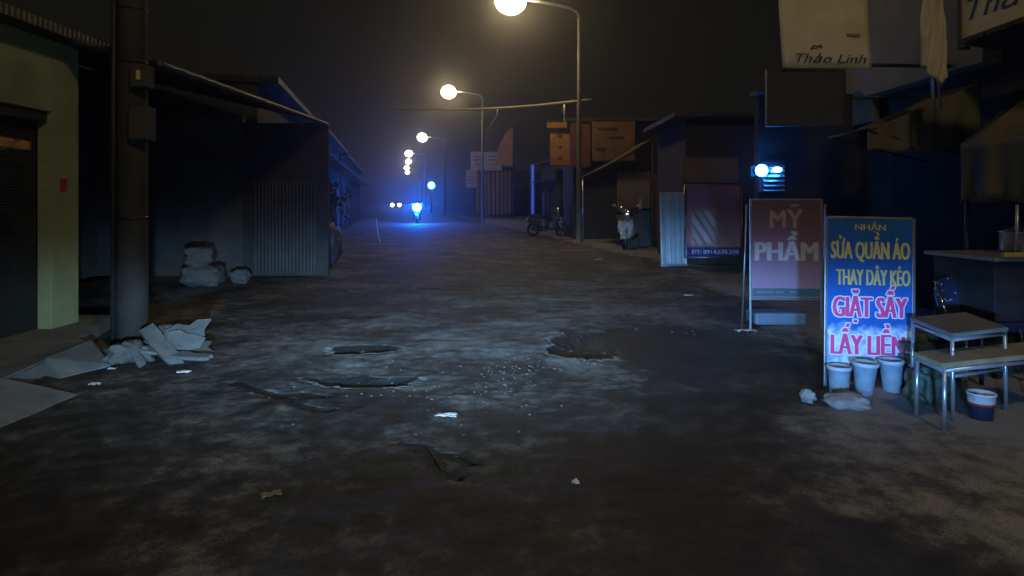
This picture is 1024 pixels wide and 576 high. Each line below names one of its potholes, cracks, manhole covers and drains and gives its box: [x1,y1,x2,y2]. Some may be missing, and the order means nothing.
pothole [295,374,428,389]
pothole [539,333,621,363]
pothole [324,344,406,356]
crack [394,443,477,481]
crack [231,382,329,412]
